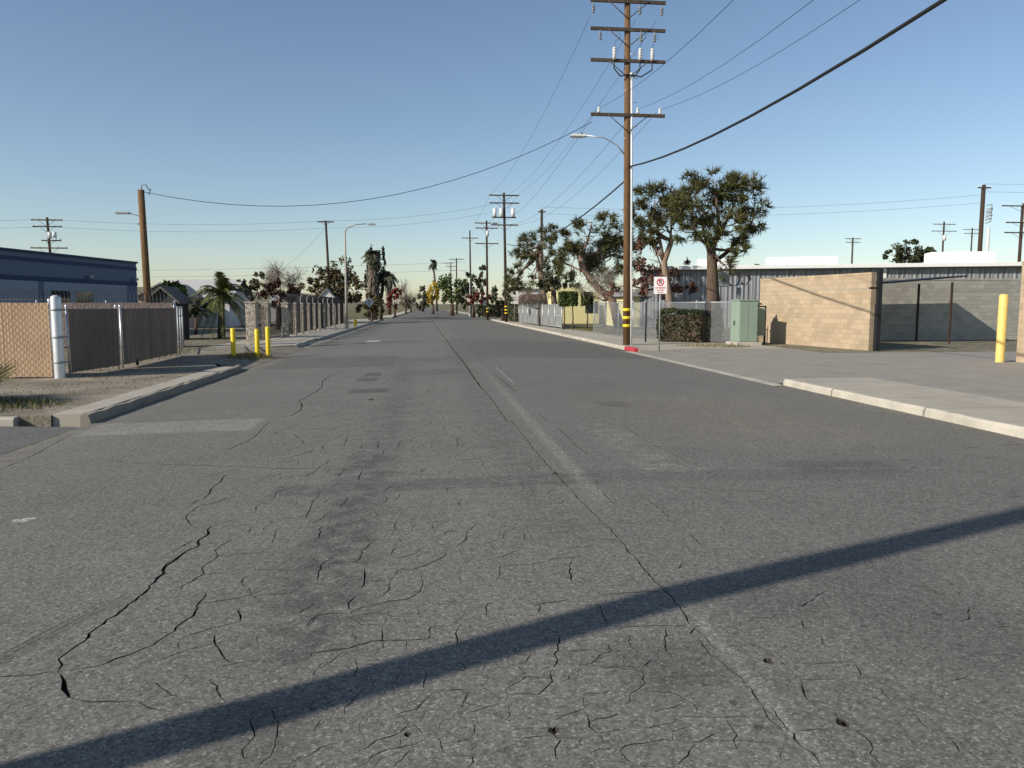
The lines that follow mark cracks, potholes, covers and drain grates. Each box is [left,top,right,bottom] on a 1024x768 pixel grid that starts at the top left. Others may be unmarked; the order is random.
crack [0,356,783,768]
crack [733,591,1013,768]
